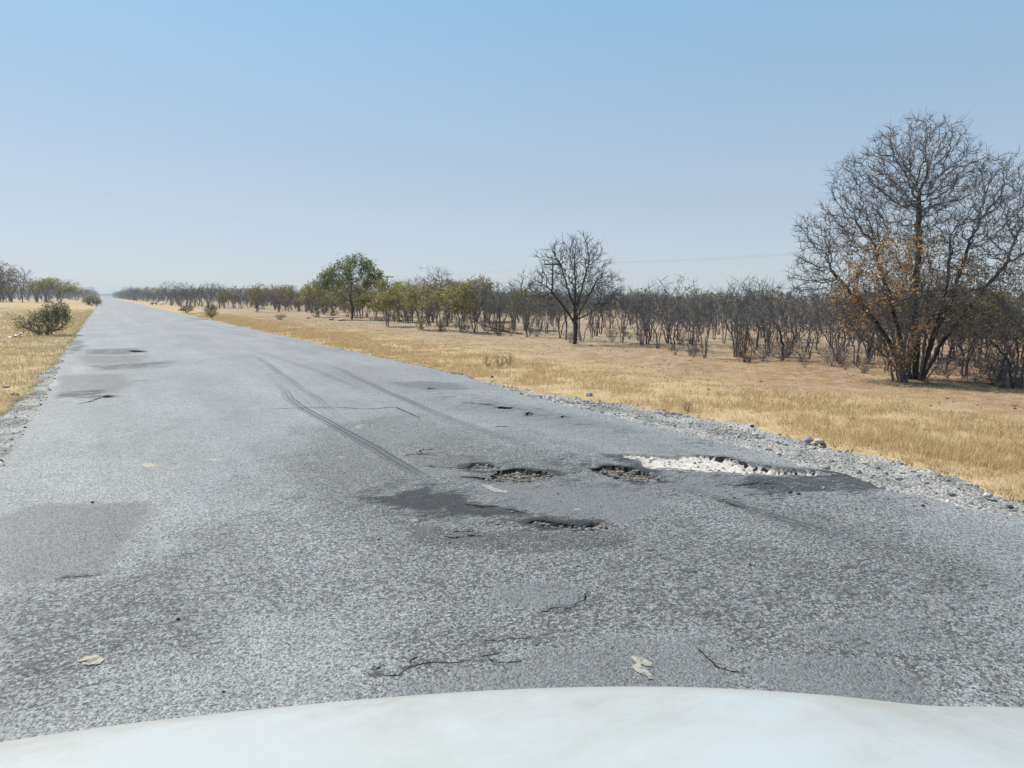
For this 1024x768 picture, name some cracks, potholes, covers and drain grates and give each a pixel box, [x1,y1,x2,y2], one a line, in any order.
pothole [466,463,502,471]
crack [374,637,531,676]
pothole [623,455,844,477]
crack [698,648,739,672]
pothole [525,520,612,532]
pothole [490,468,558,483]
pothole [591,465,664,483]
